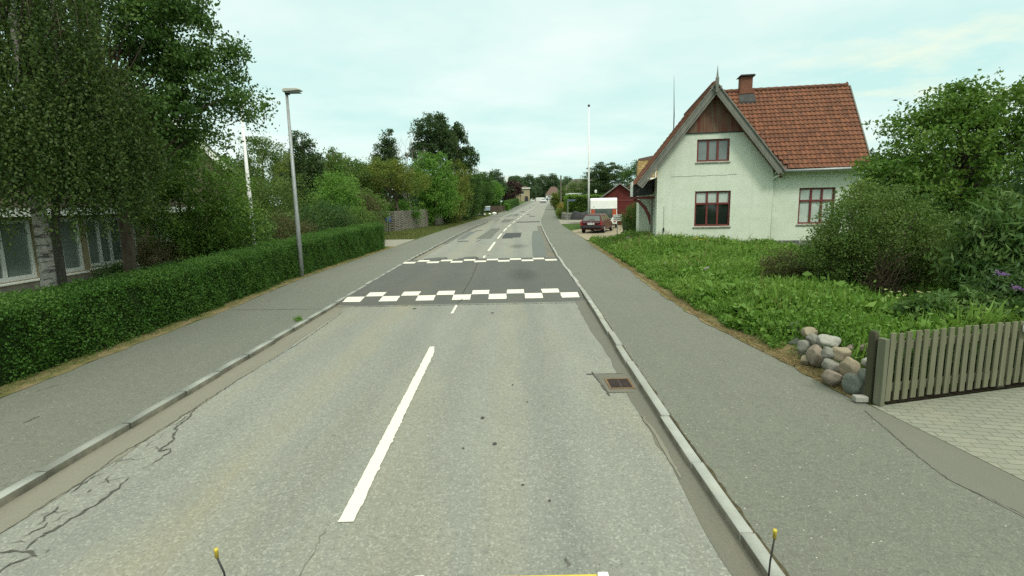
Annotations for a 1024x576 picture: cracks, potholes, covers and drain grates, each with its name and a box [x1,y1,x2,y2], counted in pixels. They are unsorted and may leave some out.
drain grate [596,374,636,392]
crack [0,374,247,572]
